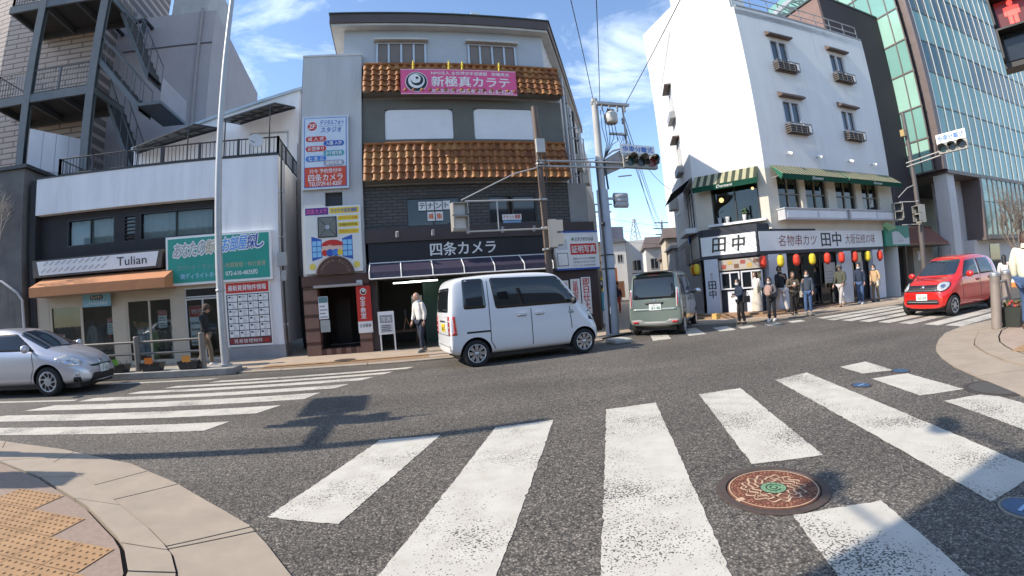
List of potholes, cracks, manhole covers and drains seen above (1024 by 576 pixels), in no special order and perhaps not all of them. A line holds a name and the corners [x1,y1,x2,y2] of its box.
manhole cover [963,381,1020,397]
manhole cover [998,497,1024,519]
manhole cover [717,467,832,515]
